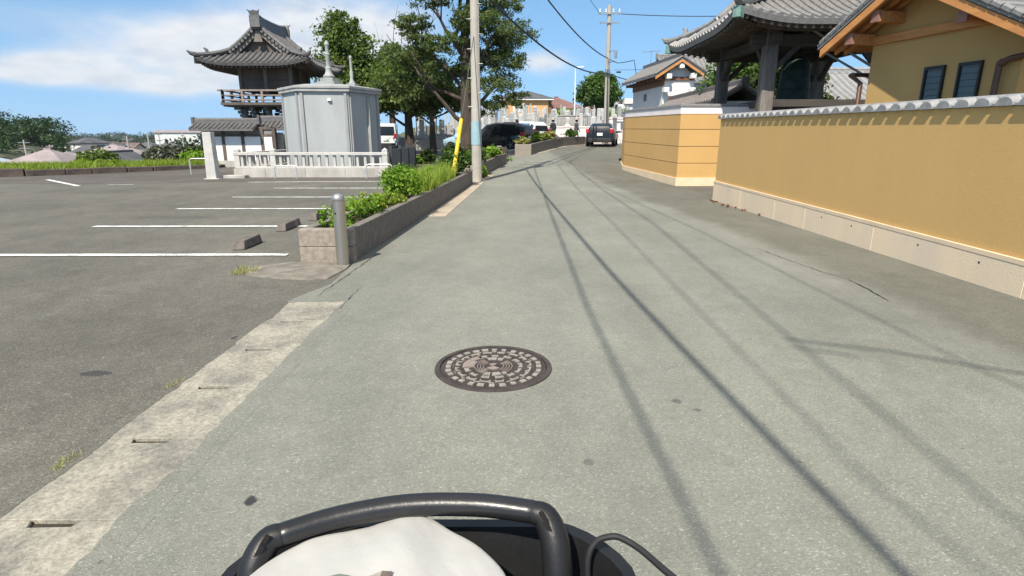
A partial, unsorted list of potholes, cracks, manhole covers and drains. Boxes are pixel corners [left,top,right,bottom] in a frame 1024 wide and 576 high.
manhole cover [435,346,552,392]
